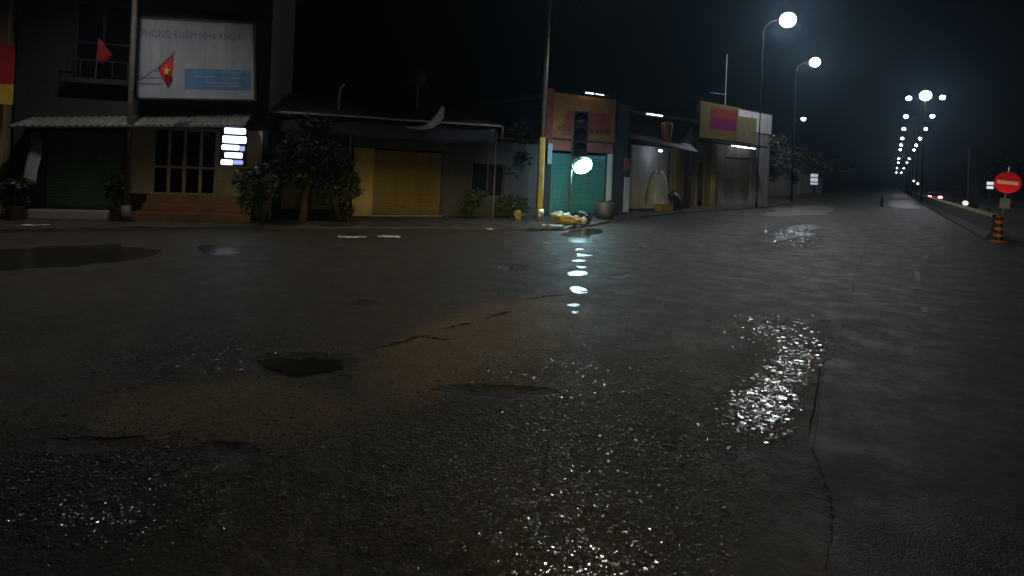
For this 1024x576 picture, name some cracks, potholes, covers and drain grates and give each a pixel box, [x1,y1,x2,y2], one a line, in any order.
pothole [37,435,150,455]
pothole [428,383,561,401]
crack [808,357,828,436]
pothole [197,441,261,465]
pothole [248,352,363,379]
crack [369,295,563,351]
